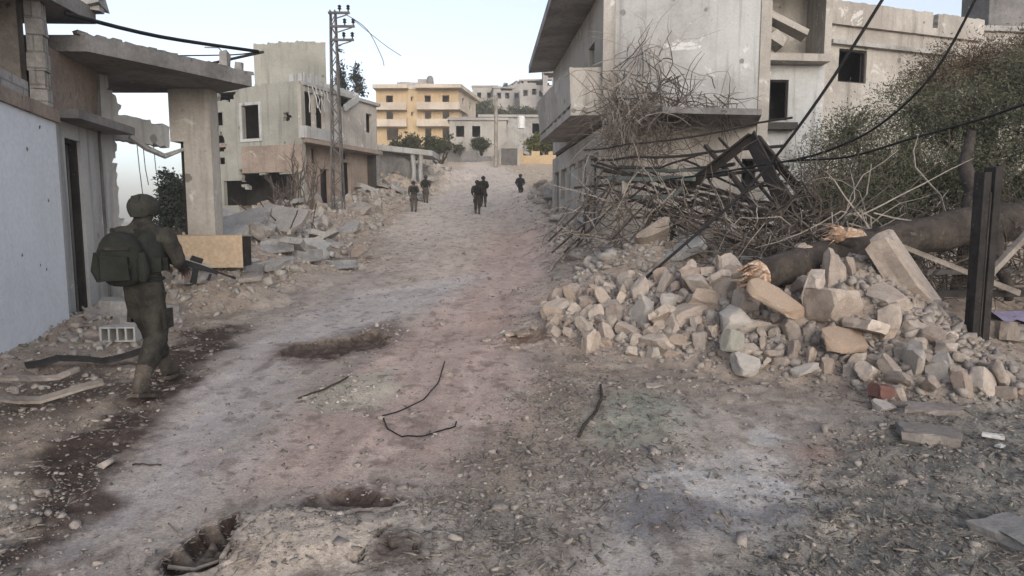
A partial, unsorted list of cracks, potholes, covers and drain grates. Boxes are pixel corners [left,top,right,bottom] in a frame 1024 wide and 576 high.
pothole [265,330,400,362]
pothole [286,483,416,515]
pothole [365,530,430,566]
pothole [143,510,256,576]
